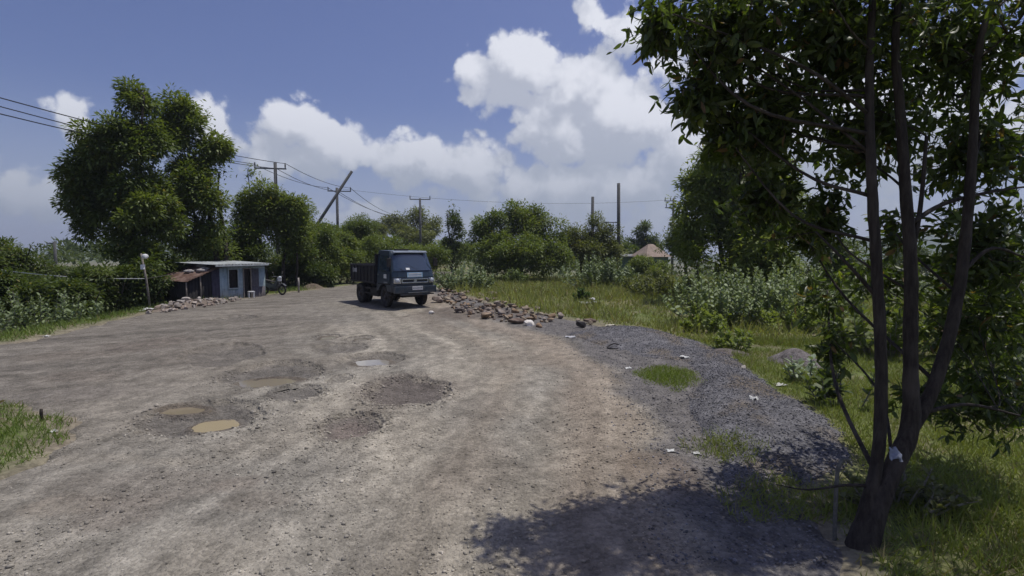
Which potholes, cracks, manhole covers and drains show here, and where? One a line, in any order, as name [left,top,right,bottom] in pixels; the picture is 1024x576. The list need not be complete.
pothole [312,410,389,442]
pothole [341,335,378,344]
pothole [361,373,457,409]
pothole [311,342,372,354]
pothole [126,397,273,441]
pothole [310,333,342,341]
pothole [333,351,409,368]
pothole [173,341,270,370]
pothole [263,383,326,403]
pothole [211,358,332,392]
